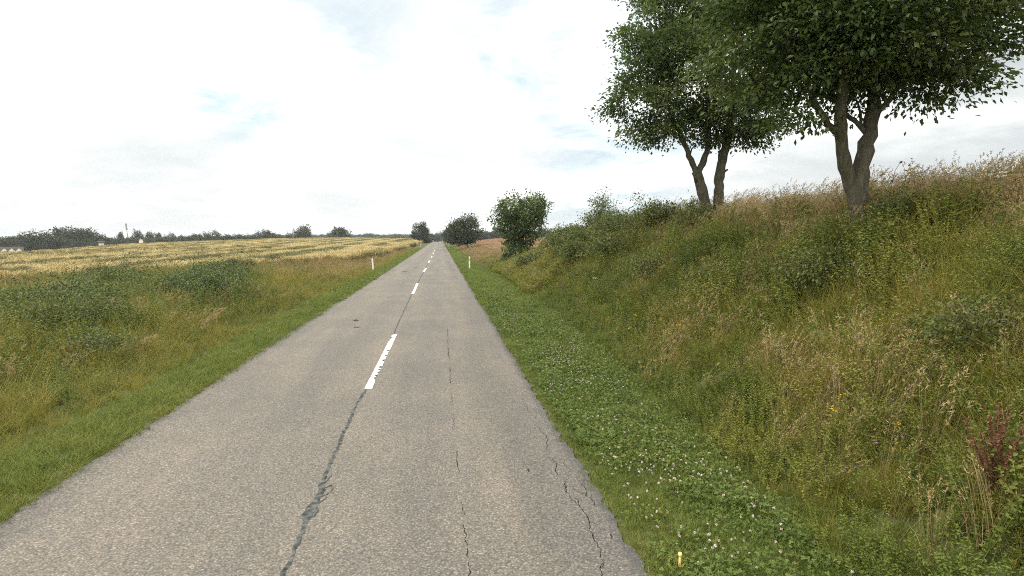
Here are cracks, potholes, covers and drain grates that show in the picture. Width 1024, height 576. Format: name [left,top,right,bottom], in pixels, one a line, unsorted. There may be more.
crack [447,329,471,576]
crack [523,402,613,576]
